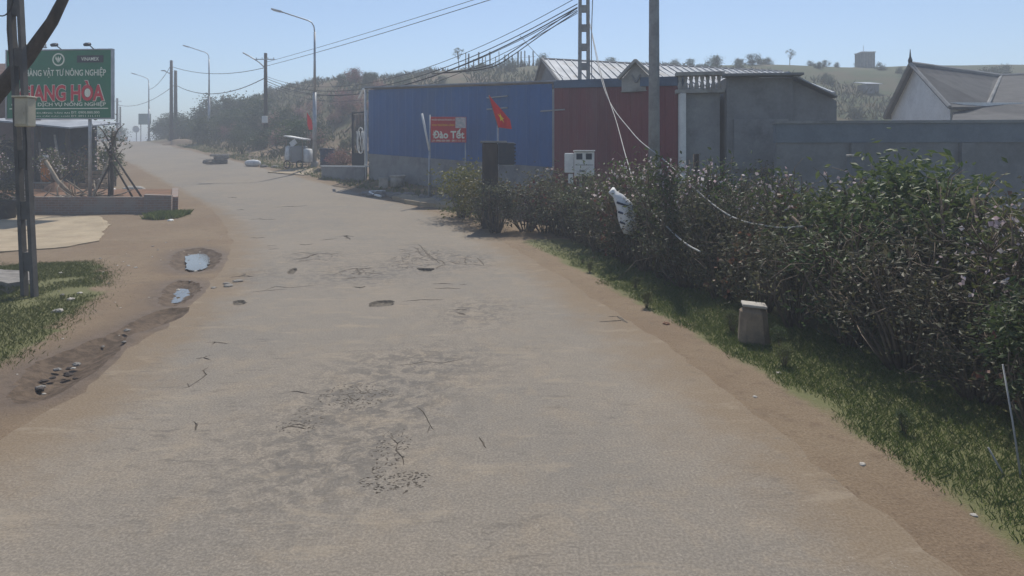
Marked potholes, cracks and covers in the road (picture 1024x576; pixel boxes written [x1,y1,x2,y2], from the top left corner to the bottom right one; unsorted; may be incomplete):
pothole [168,248,222,273]
crack [296,235,484,315]
crack [185,342,228,388]
crack [359,406,434,494]
pothole [157,281,203,306]
crack [276,384,394,433]
